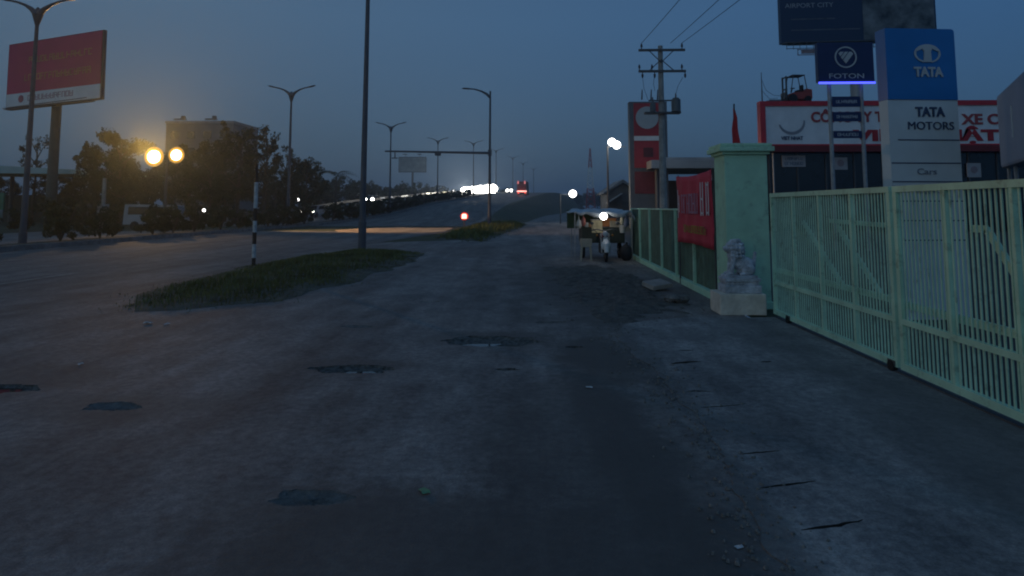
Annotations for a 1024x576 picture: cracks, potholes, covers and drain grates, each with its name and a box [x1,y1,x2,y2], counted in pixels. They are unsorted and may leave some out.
pothole [0,384,41,394]
crack [687,390,747,408]
pothole [441,335,545,347]
pothole [82,401,142,411]
pothole [306,364,396,374]
crack [802,519,863,530]
crack [671,350,701,364]
pothole [268,489,357,506]
